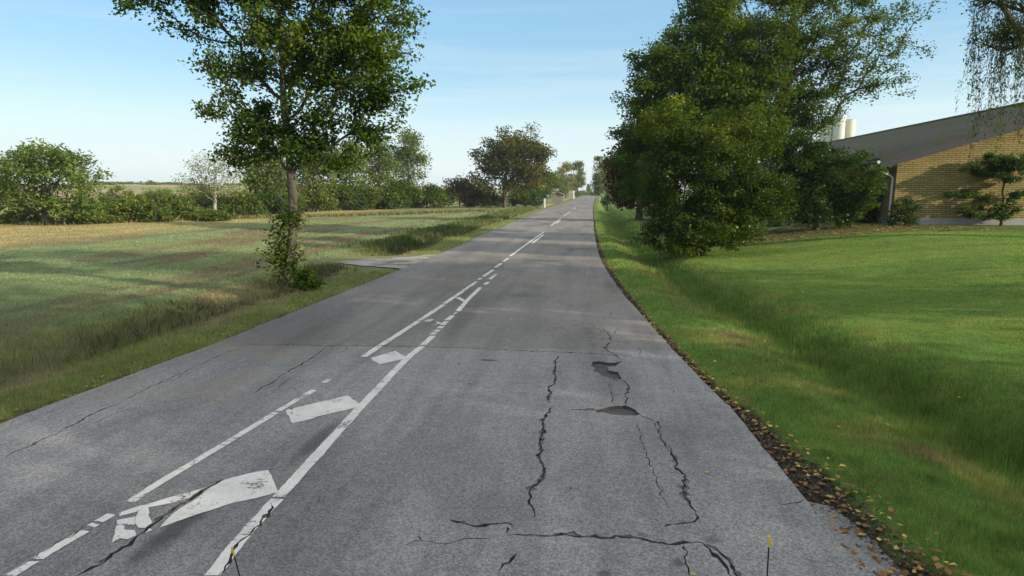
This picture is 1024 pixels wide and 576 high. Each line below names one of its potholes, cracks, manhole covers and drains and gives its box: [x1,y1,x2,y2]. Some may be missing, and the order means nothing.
pothole [597,405,639,416]
crack [257,348,325,391]
crack [406,355,742,576]
crack [4,345,248,458]
pothole [591,361,621,380]
